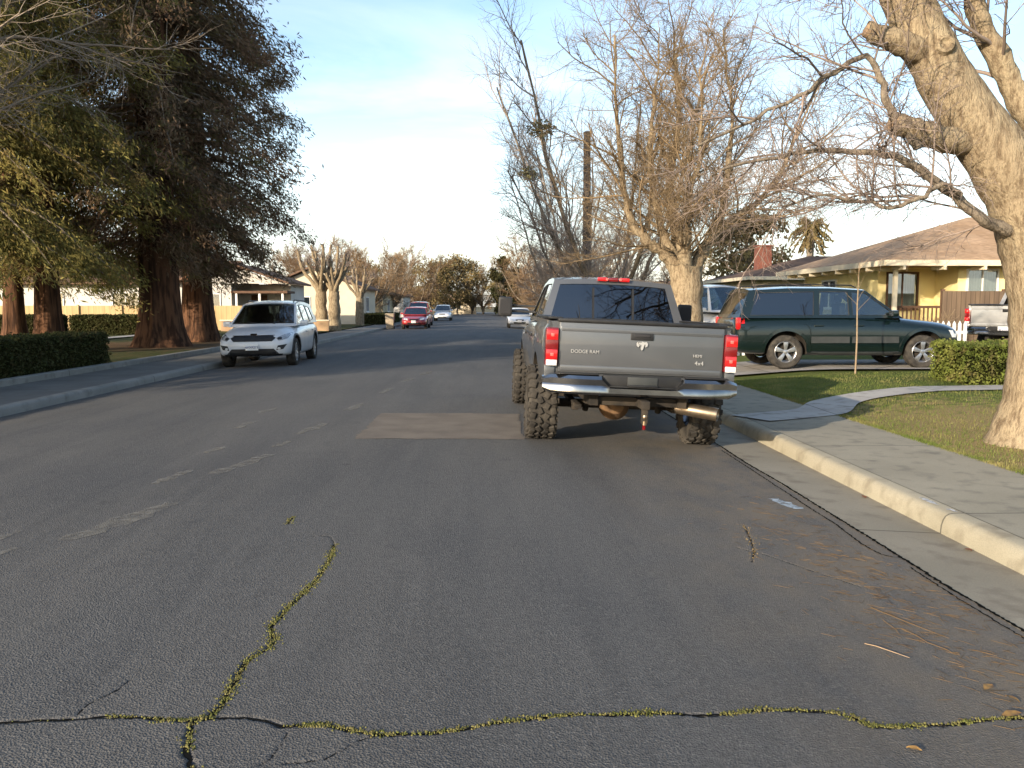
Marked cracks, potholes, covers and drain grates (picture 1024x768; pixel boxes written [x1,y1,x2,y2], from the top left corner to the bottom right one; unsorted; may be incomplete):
crack [0,536,1024,768]
crack [739,524,853,585]
